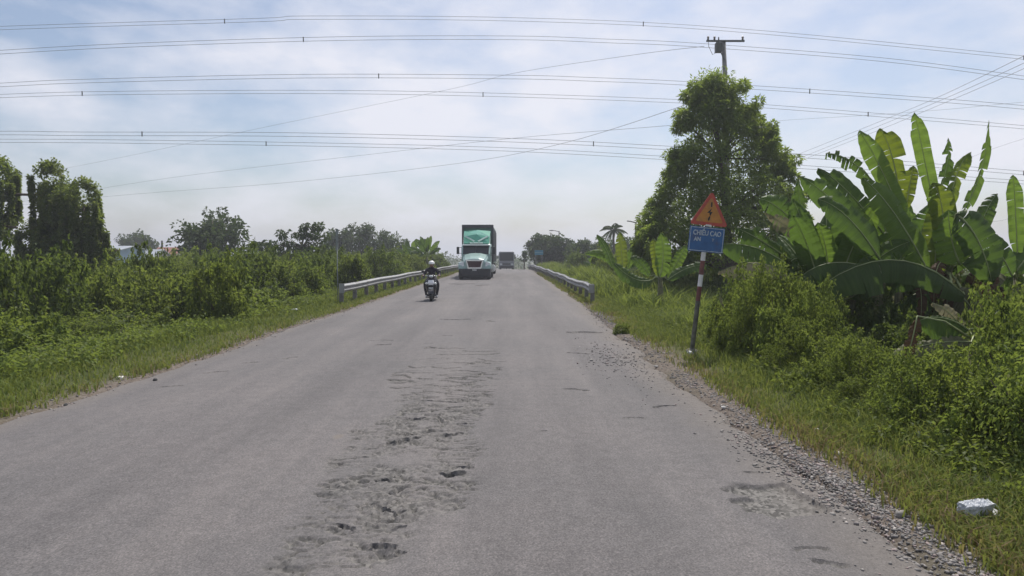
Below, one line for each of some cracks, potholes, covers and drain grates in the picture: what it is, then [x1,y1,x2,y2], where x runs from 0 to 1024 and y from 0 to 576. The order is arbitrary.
pothole [438,470,467,478]
pothole [718,482,834,520]
pothole [370,504,395,517]
crack [205,319,506,576]
pothole [368,542,400,552]
